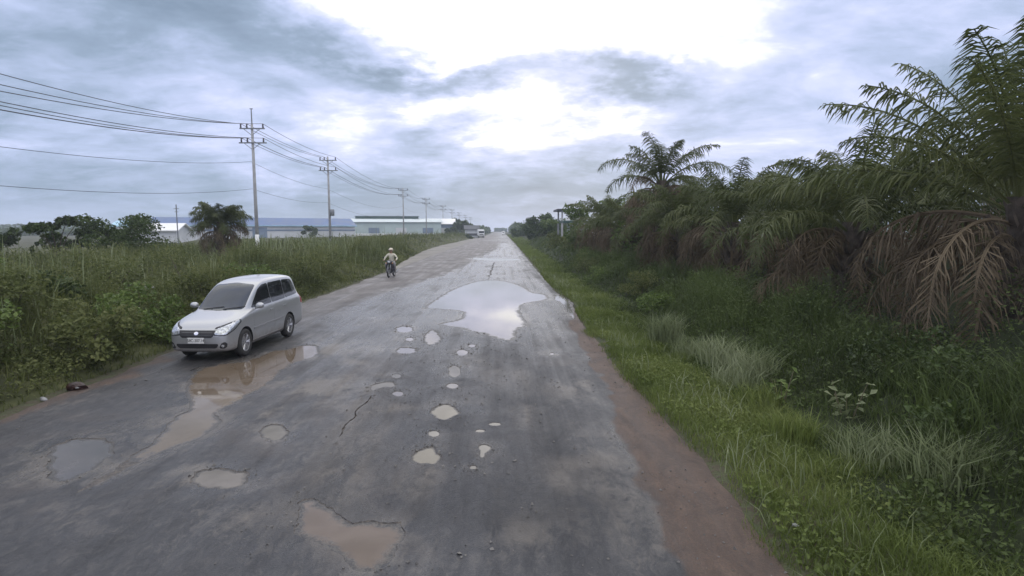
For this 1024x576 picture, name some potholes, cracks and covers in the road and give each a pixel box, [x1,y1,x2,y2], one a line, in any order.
pothole [430,404,461,420]
pothole [77,345,320,493]
pothole [43,438,115,483]
crack [339,396,371,437]
pothole [294,498,406,572]
pothole [411,446,442,464]
pothole [370,382,396,391]
pothole [424,280,549,341]
pothole [448,365,461,377]
pothole [478,444,492,457]
